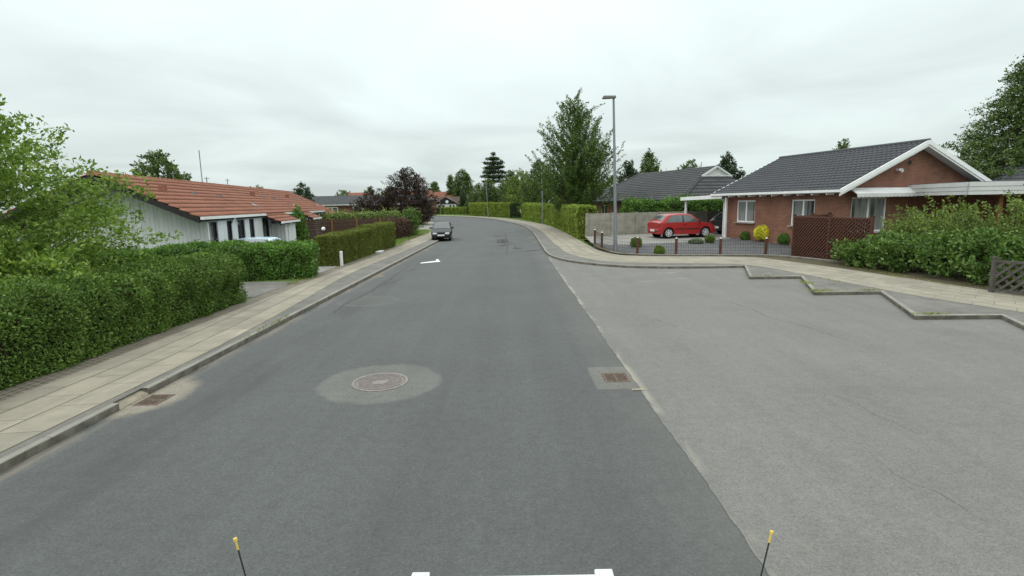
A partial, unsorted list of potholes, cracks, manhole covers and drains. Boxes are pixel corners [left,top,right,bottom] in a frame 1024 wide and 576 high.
drain grate [601,373,631,382]
manhole cover [351,373,408,392]
drain grate [132,394,176,406]
crack [334,265,410,313]
crack [878,460,1004,531]
